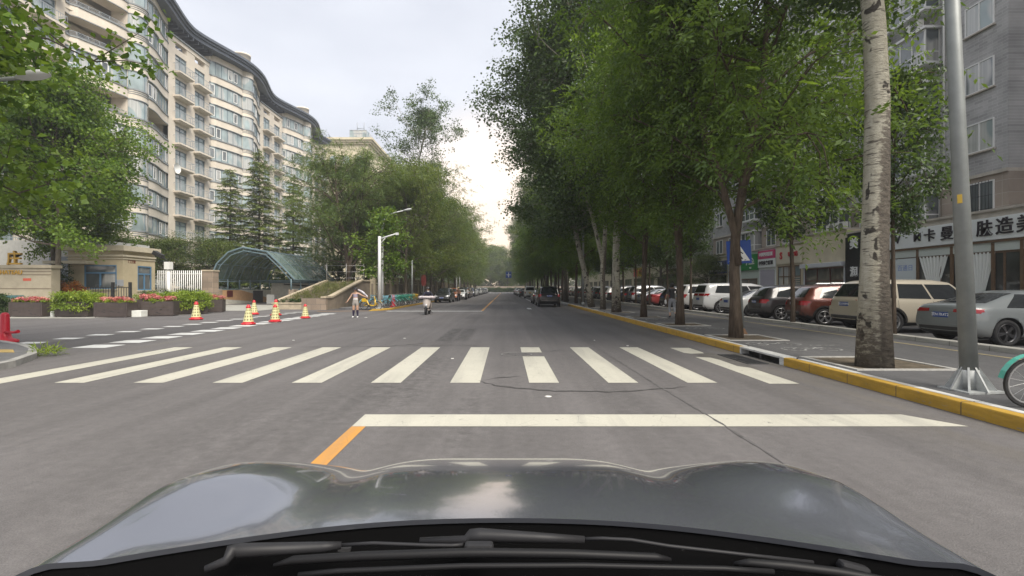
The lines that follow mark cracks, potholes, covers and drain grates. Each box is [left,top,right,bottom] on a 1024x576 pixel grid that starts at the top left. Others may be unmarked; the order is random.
drain grate [740,346,796,366]
drain grate [717,354,769,364]
crack [478,376,677,392]
